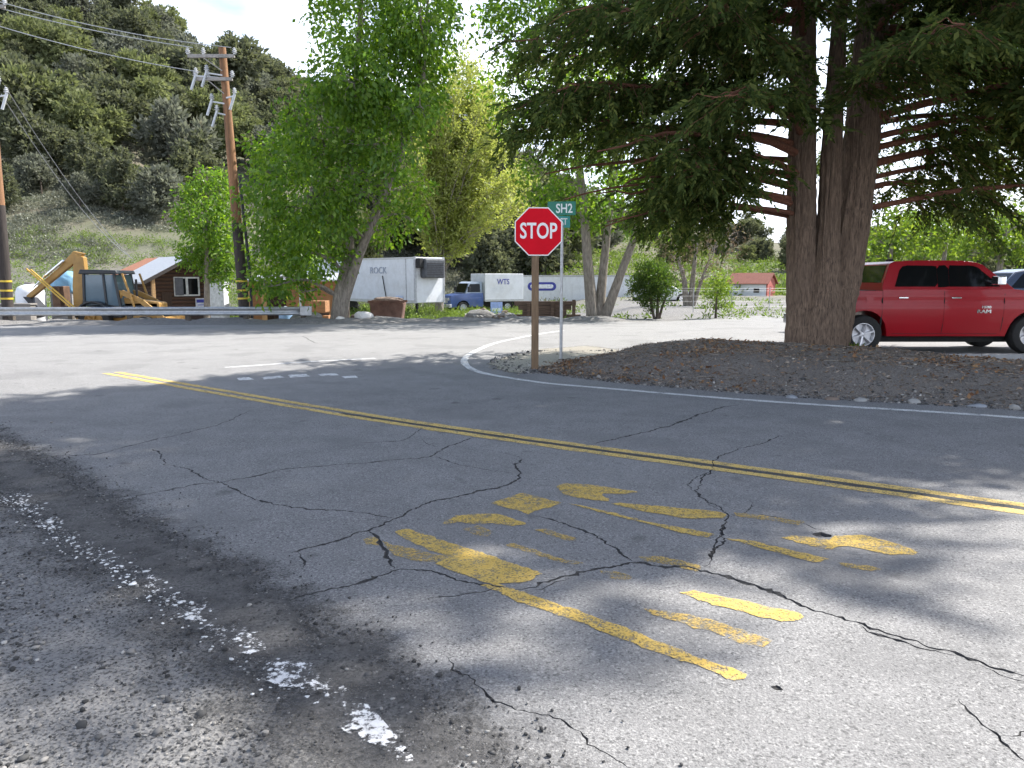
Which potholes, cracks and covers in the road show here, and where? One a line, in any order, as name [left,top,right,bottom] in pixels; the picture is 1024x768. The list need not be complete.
crack [446,656,630,768]
crack [71,411,1024,682]
crack [958,699,1024,761]
crack [595,405,735,444]
